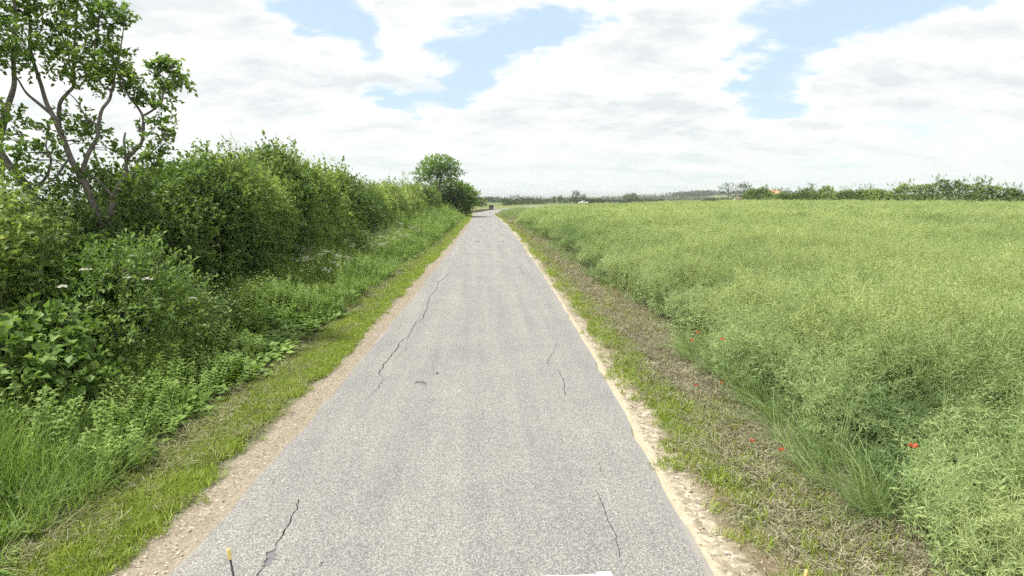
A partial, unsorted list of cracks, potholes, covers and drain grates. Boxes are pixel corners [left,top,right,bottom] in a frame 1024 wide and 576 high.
crack [275,499,299,547]
crack [594,463,623,565]
crack [368,274,448,398]
